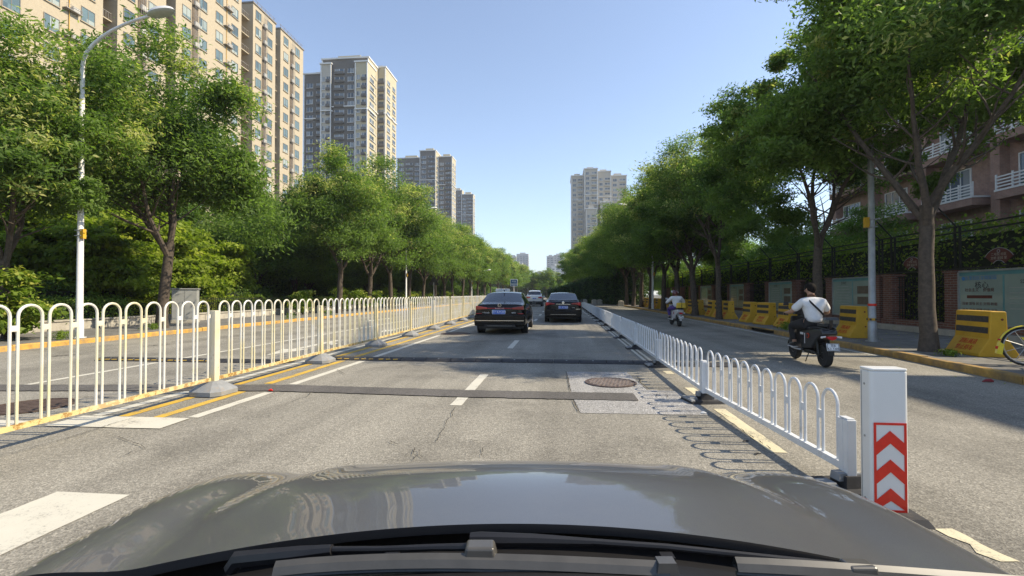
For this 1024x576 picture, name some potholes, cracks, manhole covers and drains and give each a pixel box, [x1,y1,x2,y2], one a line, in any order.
manhole cover [585,377,637,388]
